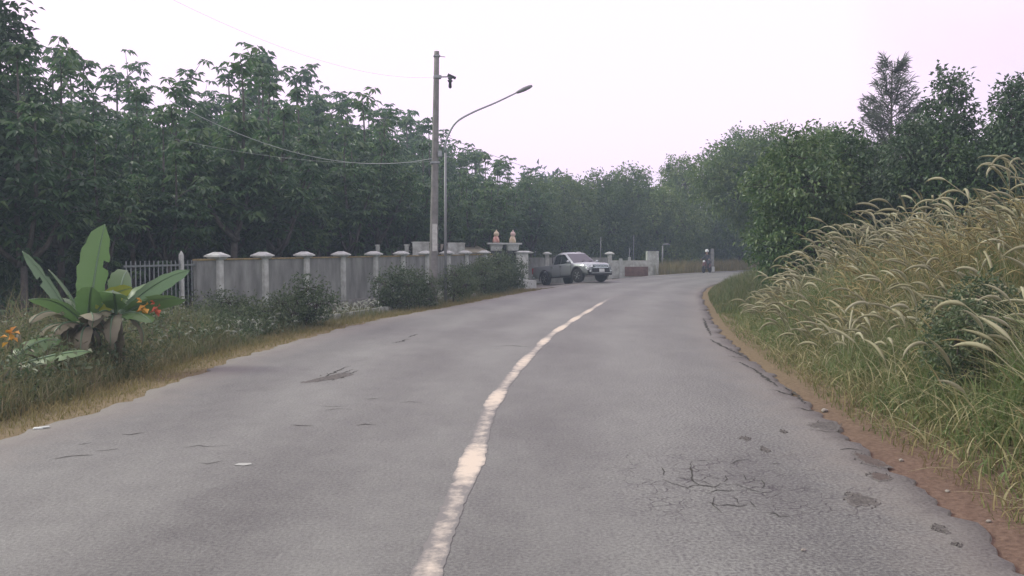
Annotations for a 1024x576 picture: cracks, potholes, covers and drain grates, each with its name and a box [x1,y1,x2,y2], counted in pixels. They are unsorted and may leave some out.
pothole [930,523,952,534]
crack [662,458,778,516]
pothole [300,372,353,383]
crack [703,319,818,411]
pothole [807,420,843,431]
pothole [843,491,881,508]
pothole [865,471,894,482]
